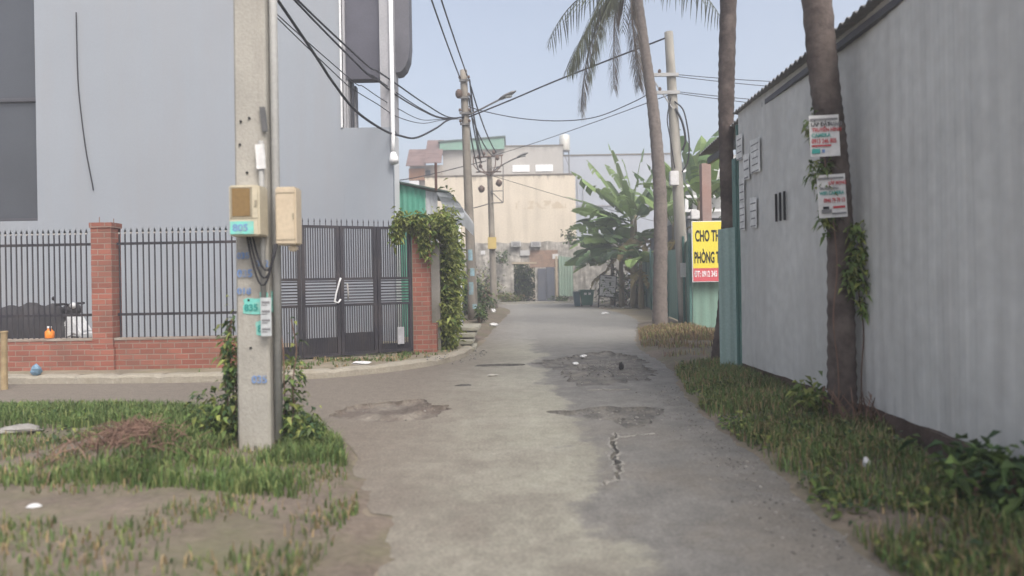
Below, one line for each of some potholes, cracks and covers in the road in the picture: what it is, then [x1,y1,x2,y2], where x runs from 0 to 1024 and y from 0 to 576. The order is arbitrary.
pothole [329,399,452,422]
pothole [532,351,658,387]
pothole [546,406,664,428]
crack [601,431,660,486]
